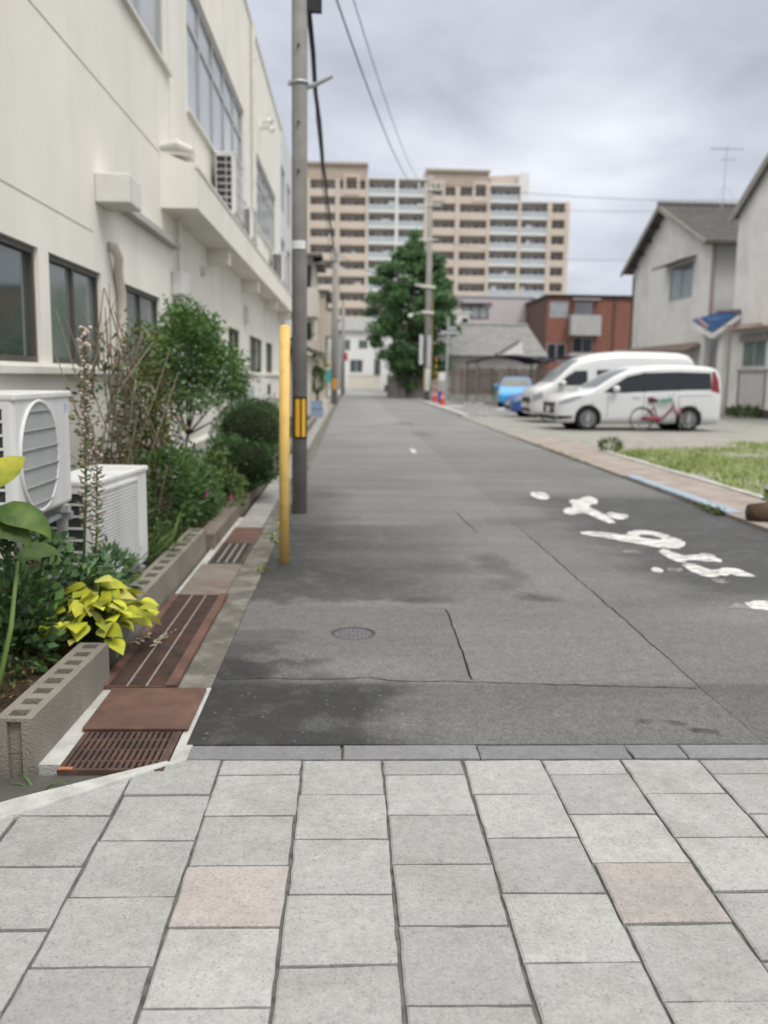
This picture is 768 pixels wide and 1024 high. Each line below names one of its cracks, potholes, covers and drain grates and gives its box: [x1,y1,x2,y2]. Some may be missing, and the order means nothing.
manhole cover [331,627,376,640]
drain grate [207,543,254,565]
drain grate [57,730,183,776]
drain grate [104,593,228,690]
crack [220,610,692,689]
